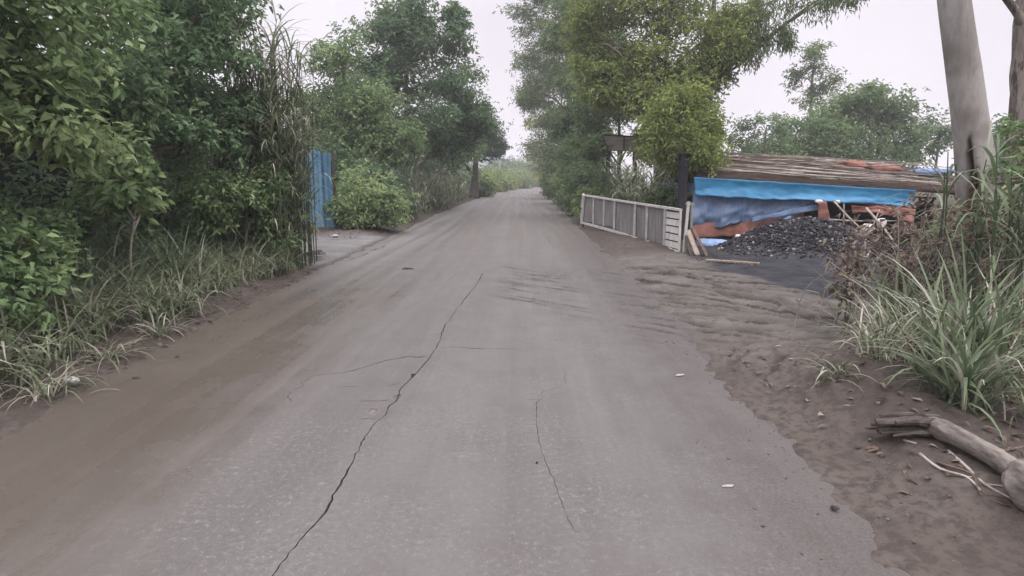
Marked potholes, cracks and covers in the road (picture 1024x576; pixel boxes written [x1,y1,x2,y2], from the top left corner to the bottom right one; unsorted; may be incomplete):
crack [532,376,575,531]
crack [272,275,524,576]
